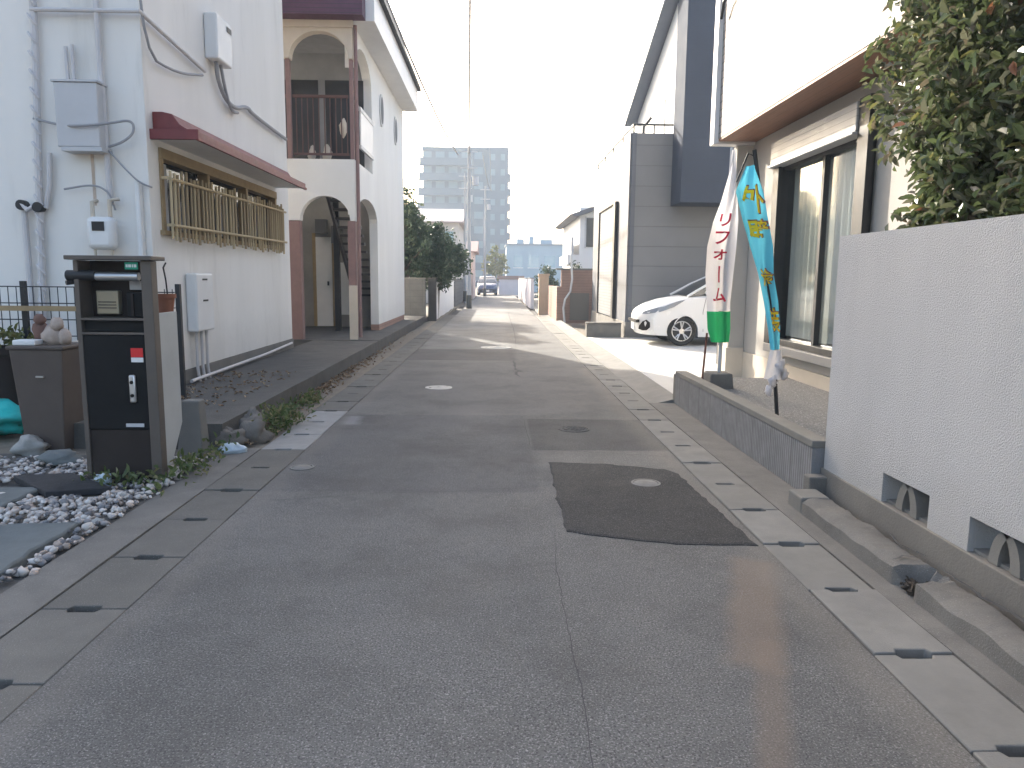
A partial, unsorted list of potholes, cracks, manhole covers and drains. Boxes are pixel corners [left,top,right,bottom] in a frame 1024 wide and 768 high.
utility cover [631,479,661,487]
crack [554,532,594,768]
